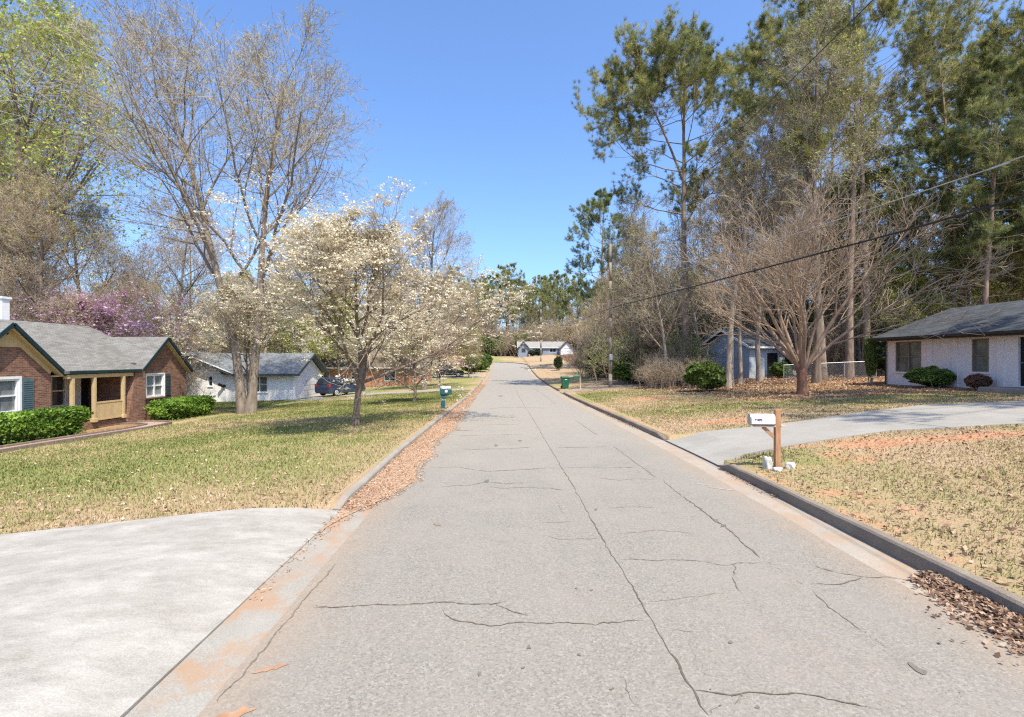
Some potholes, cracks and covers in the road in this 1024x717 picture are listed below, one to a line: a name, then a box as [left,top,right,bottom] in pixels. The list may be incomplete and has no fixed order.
crack [800,566,907,629]
crack [320,393,876,714]
